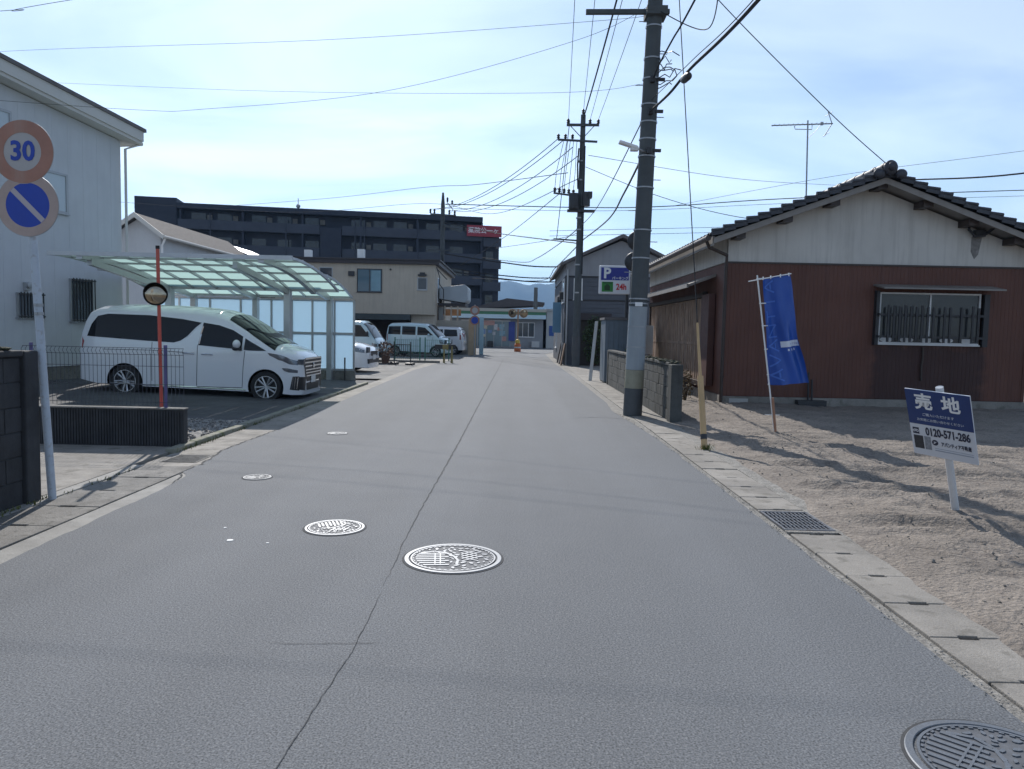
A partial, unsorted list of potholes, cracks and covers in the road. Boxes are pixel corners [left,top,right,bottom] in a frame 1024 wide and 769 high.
manhole cover [402,544,504,575]
crack [275,595,380,769]
manhole cover [900,719,1024,769]
manhole cover [302,520,367,536]
drain grate [760,511,836,532]
